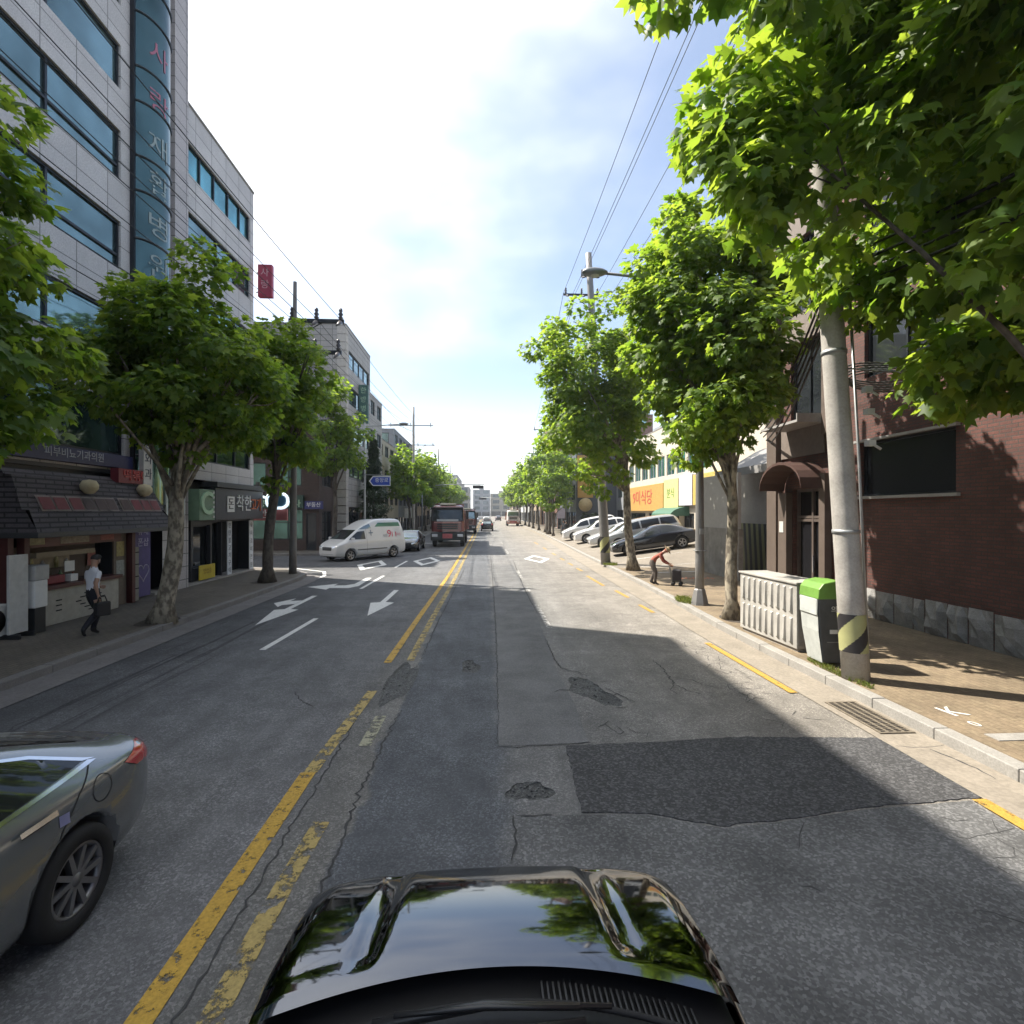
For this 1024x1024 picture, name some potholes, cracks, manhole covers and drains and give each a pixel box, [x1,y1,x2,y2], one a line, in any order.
crack [653,642,820,726]
crack [940,816,1023,882]
drain grate [825,701,916,734]
pothole [378,662,419,707]
pothole [568,677,623,706]
crack [511,814,552,860]
pothole [462,660,481,673]
pothole [504,781,556,800]
